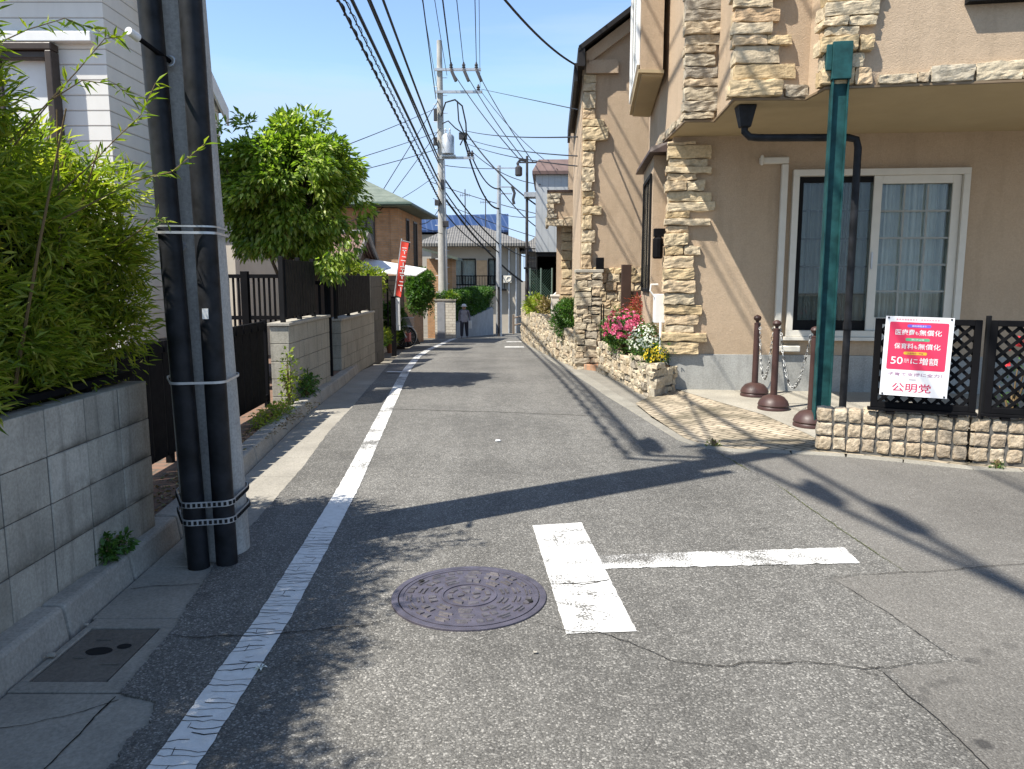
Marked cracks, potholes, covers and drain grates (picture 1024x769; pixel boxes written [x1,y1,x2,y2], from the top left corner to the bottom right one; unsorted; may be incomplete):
manhole cover [391,566,546,632]
crack [833,563,1023,578]
crack [528,619,954,675]
